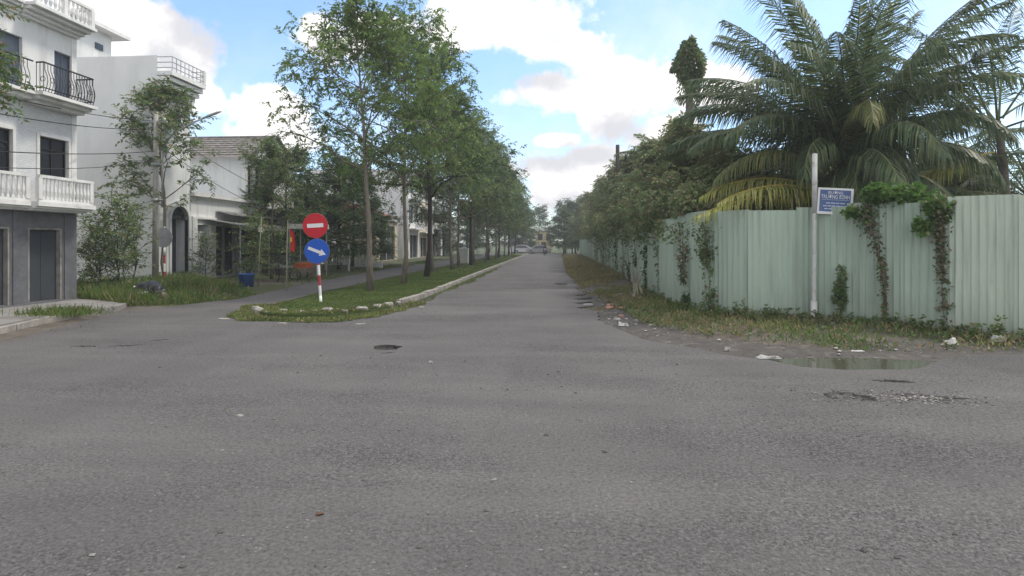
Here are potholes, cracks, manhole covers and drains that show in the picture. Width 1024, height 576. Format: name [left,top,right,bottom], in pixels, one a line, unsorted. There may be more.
pothole [824,392,877,402]
pothole [884,393,970,402]
